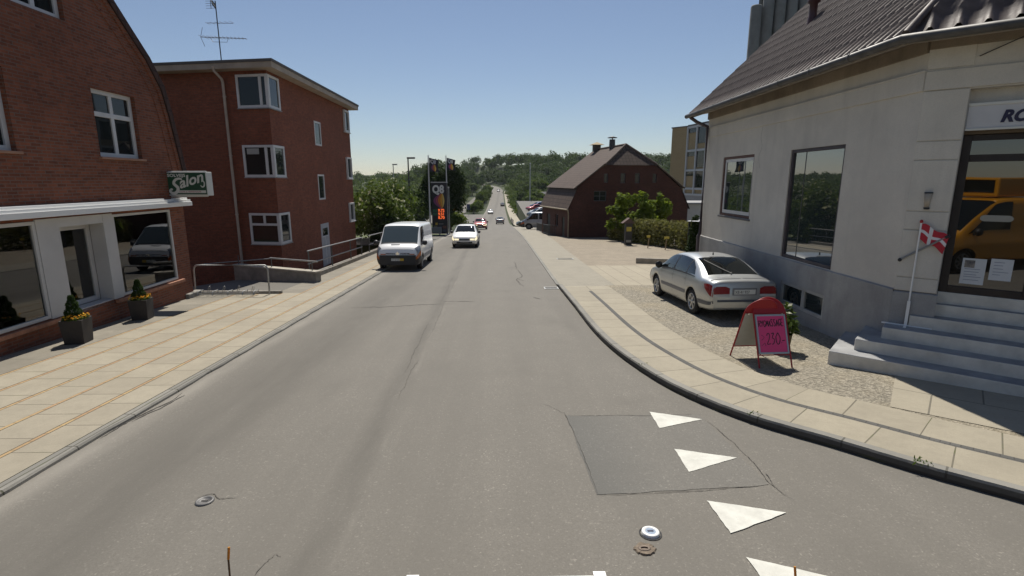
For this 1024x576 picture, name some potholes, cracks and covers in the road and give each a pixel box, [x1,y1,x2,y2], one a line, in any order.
manhole cover [633,542,656,556]
manhole cover [195,496,215,506]
